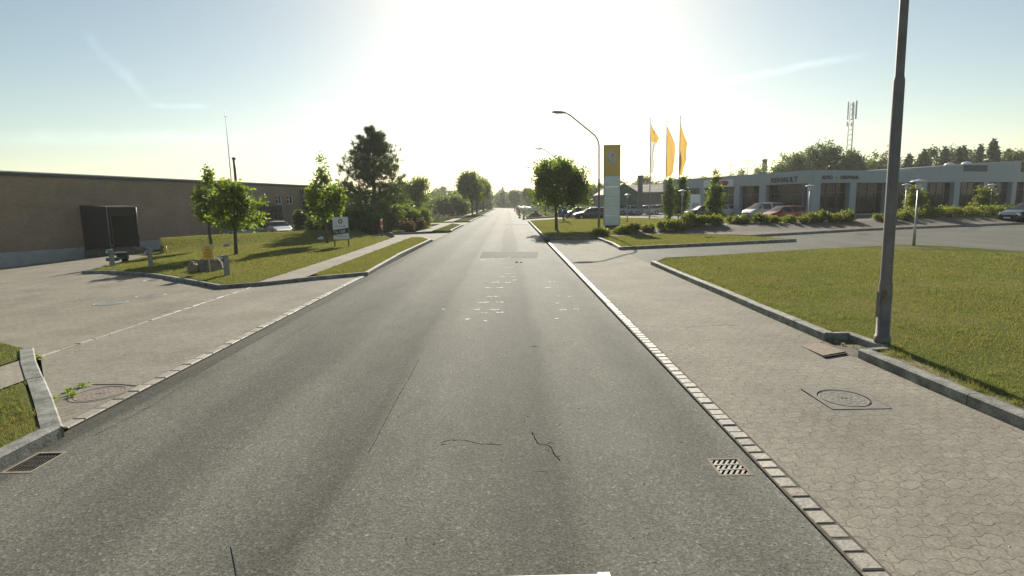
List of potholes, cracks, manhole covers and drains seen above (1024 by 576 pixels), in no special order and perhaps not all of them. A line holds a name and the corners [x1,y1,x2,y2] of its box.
manhole cover [800,388,892,410]
drain grate [0,451,68,474]
manhole cover [68,384,137,403]
drain grate [706,458,753,476]
crack [531,433,561,472]
